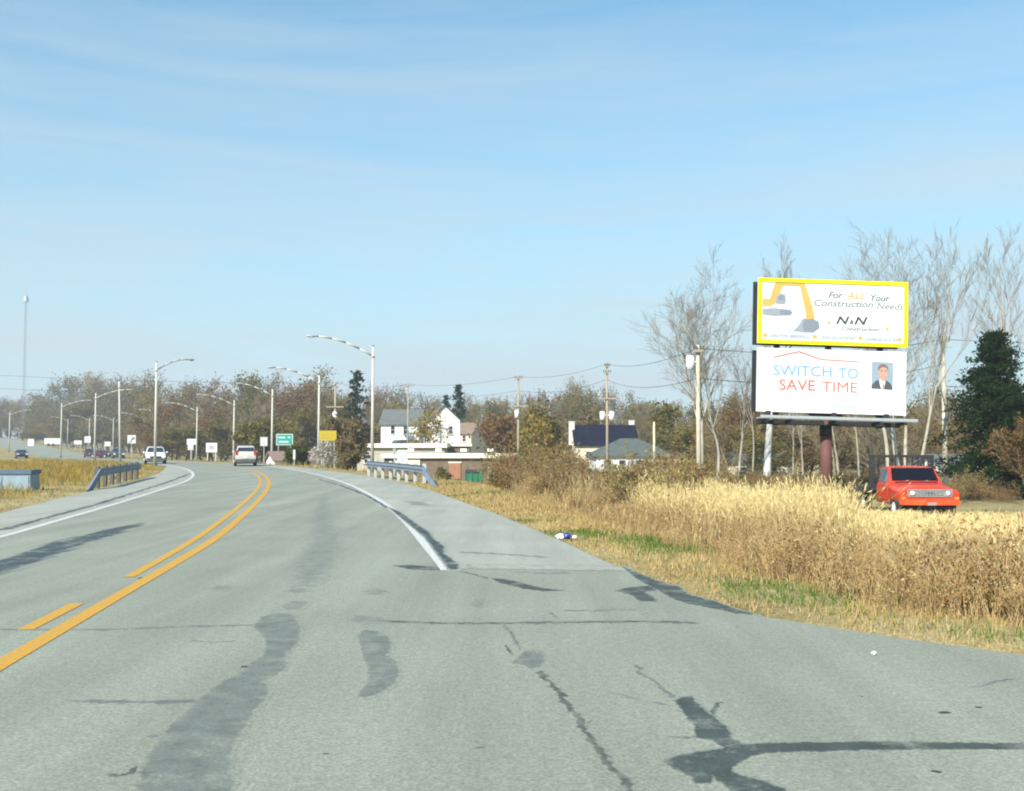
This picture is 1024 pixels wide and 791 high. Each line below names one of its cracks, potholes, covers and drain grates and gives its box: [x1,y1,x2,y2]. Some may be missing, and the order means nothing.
crack [709,702,725,715]
crack [534,664,677,791]
